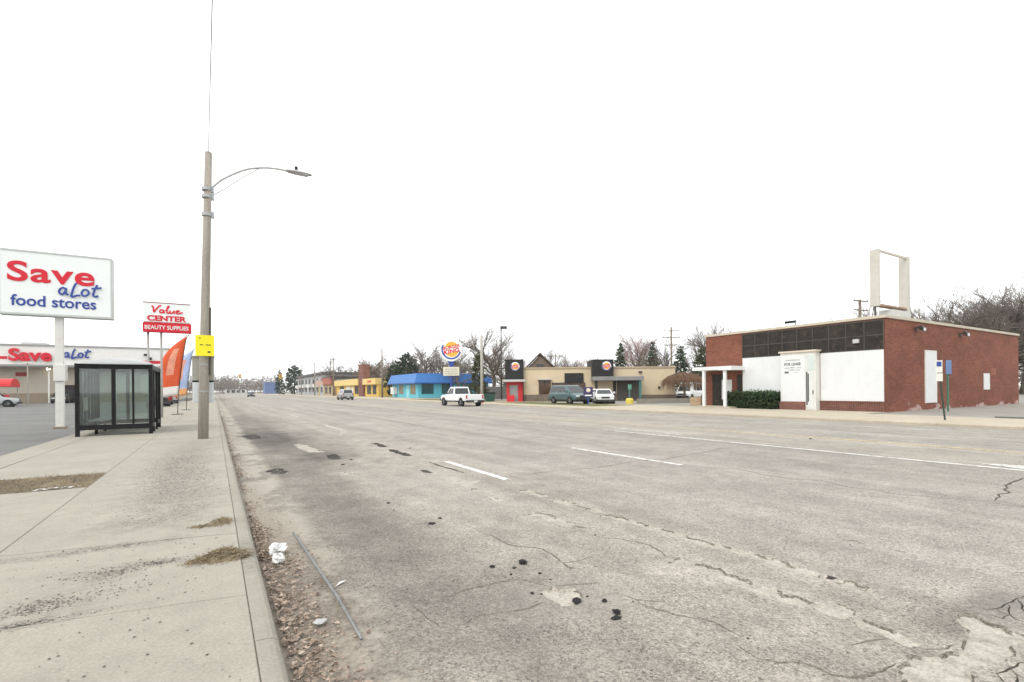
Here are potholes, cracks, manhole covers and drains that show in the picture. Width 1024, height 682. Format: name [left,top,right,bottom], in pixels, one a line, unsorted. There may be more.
crack [968,596,1024,622]
crack [624,595,897,679]
crack [412,532,668,628]
crack [694,465,1021,508]
